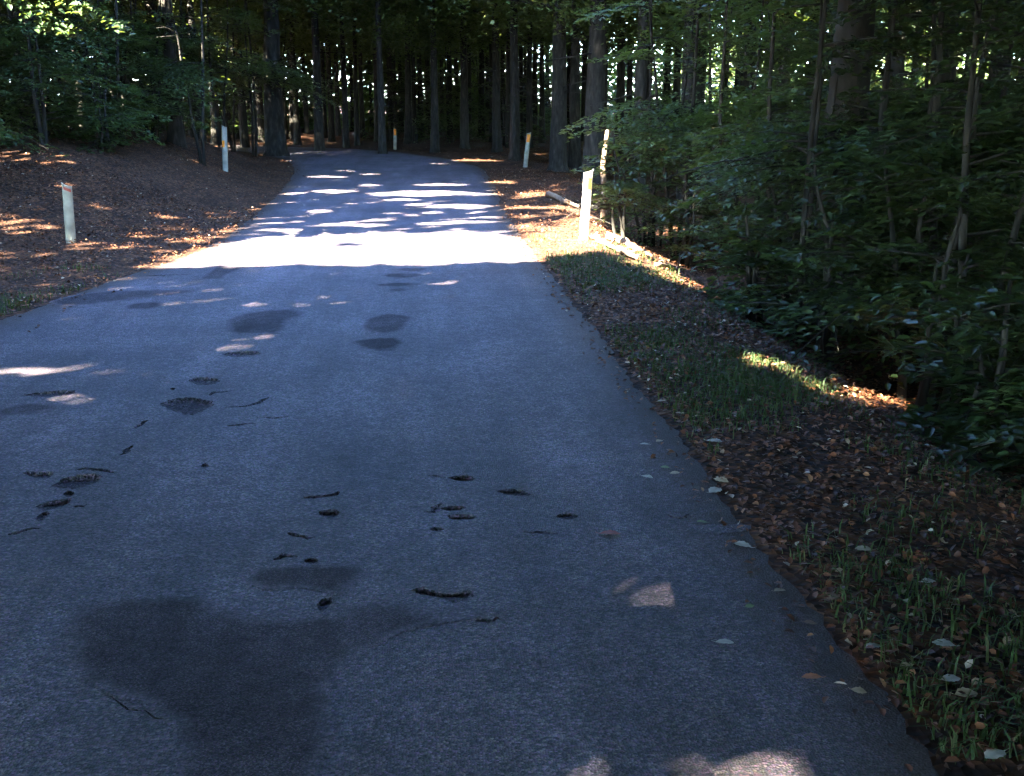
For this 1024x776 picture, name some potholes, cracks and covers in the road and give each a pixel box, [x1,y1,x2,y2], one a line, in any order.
crack [304,491,340,499]
pothole [160,397,215,415]
pothole [51,473,103,489]
crack [209,390,289,426]
pothole [189,377,220,385]
